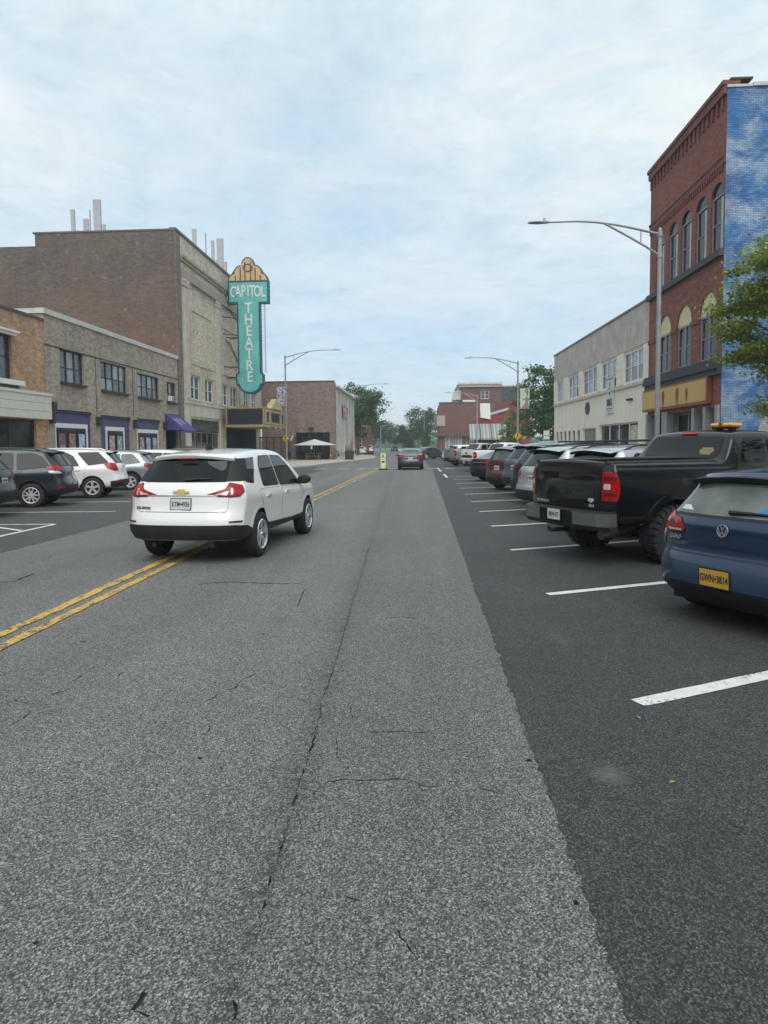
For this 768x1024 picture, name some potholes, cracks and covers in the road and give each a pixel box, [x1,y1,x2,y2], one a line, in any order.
crack [230,551,505,1023]
crack [199,582,306,613]
